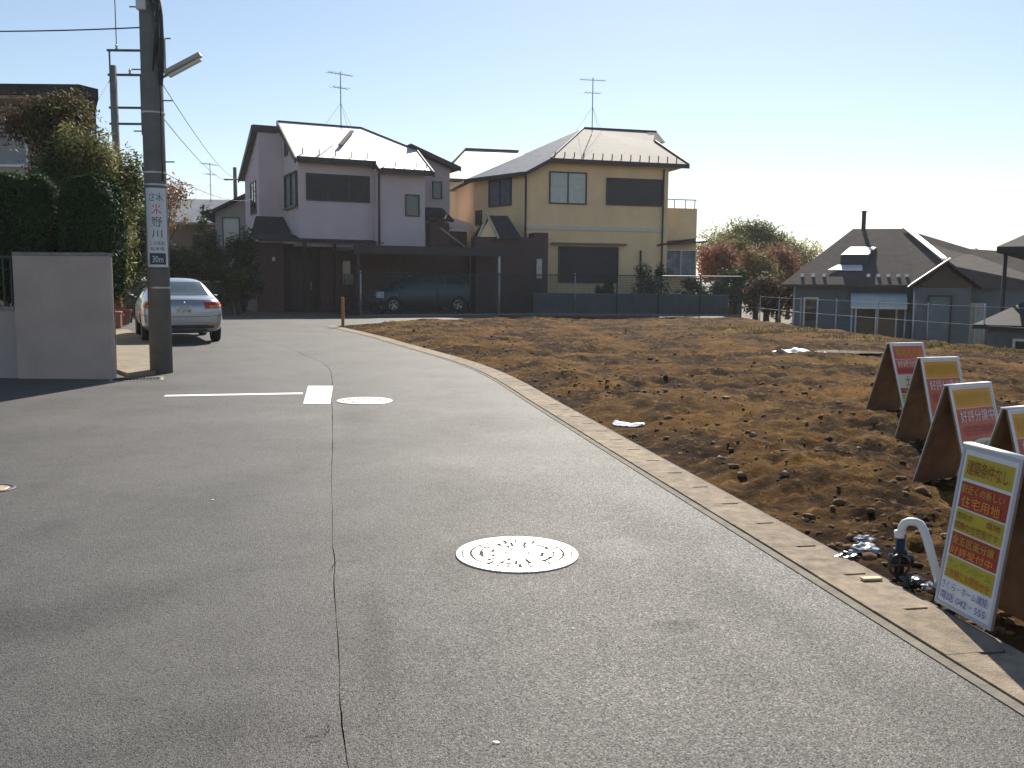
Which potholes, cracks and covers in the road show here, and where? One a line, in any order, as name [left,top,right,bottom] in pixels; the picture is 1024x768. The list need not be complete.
manhole cover [336,397,392,405]
utility cover [0,484,16,492]
manhole cover [456,536,579,574]
